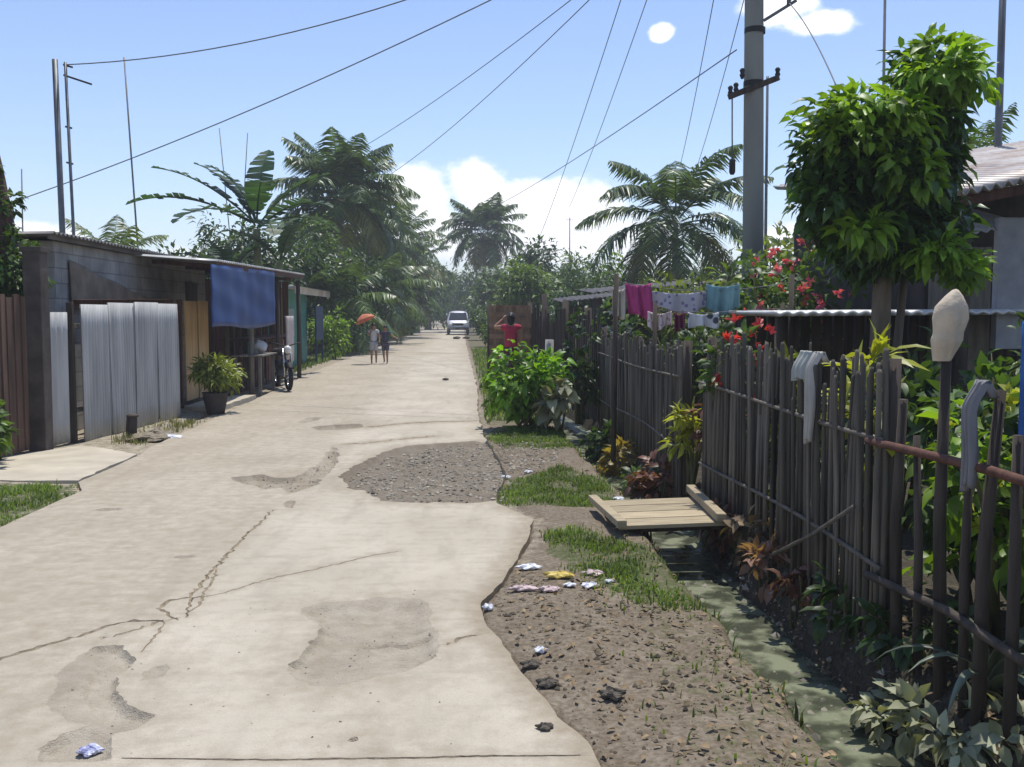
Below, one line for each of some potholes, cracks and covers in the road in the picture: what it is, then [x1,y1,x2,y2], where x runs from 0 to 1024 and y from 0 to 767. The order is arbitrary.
pothole [36,645,156,763]
pothole [231,445,341,494]
crack [0,510,398,660]
pothole [338,441,503,503]
